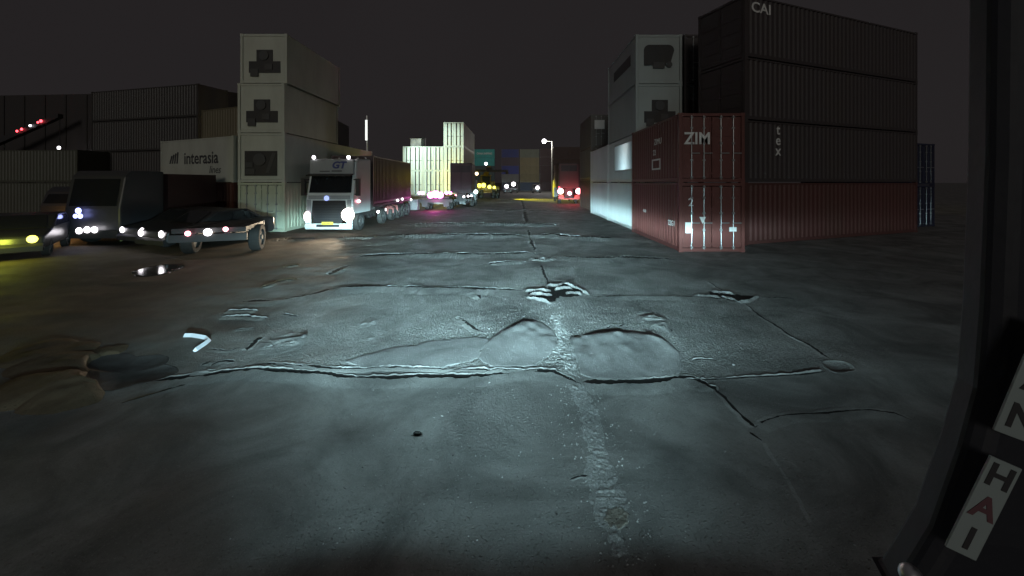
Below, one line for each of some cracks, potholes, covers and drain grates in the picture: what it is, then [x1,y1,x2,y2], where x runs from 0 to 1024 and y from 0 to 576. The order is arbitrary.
crack [122,265,912,527]
crack [486,257,555,266]
pothole [518,282,593,306]
pothole [692,290,761,304]
pothole [85,353,179,391]
